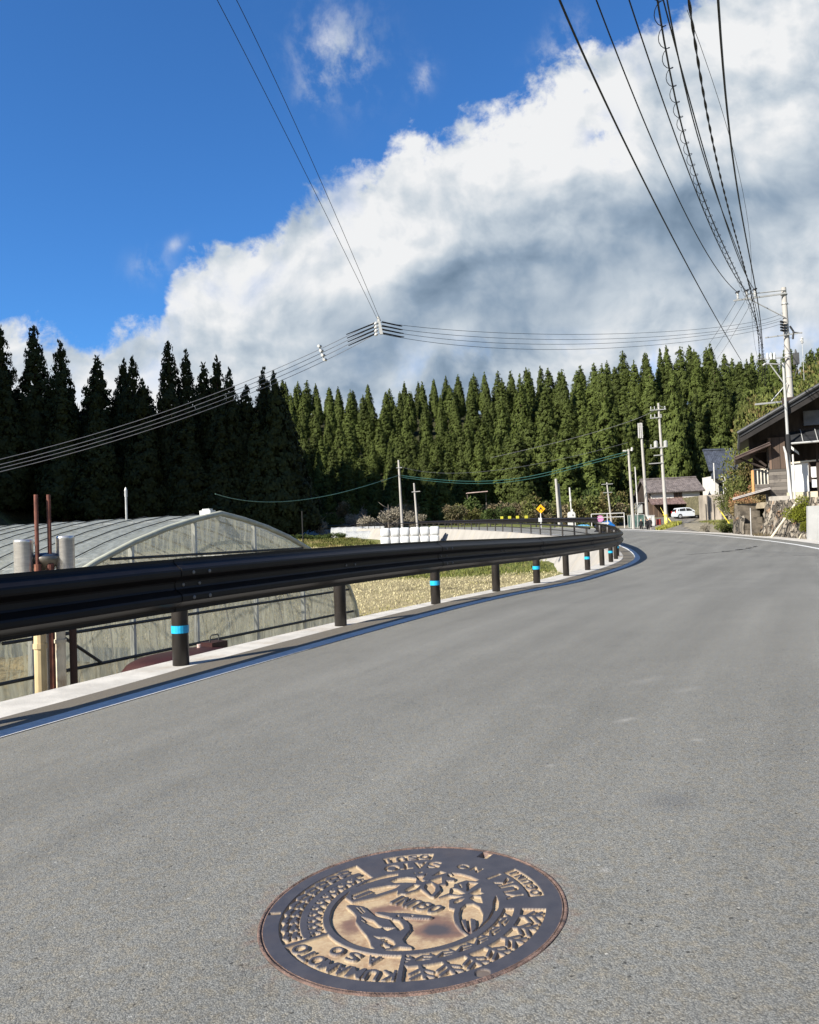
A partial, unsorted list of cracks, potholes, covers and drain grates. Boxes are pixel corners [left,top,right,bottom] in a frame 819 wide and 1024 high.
manhole cover [257,846,568,997]
